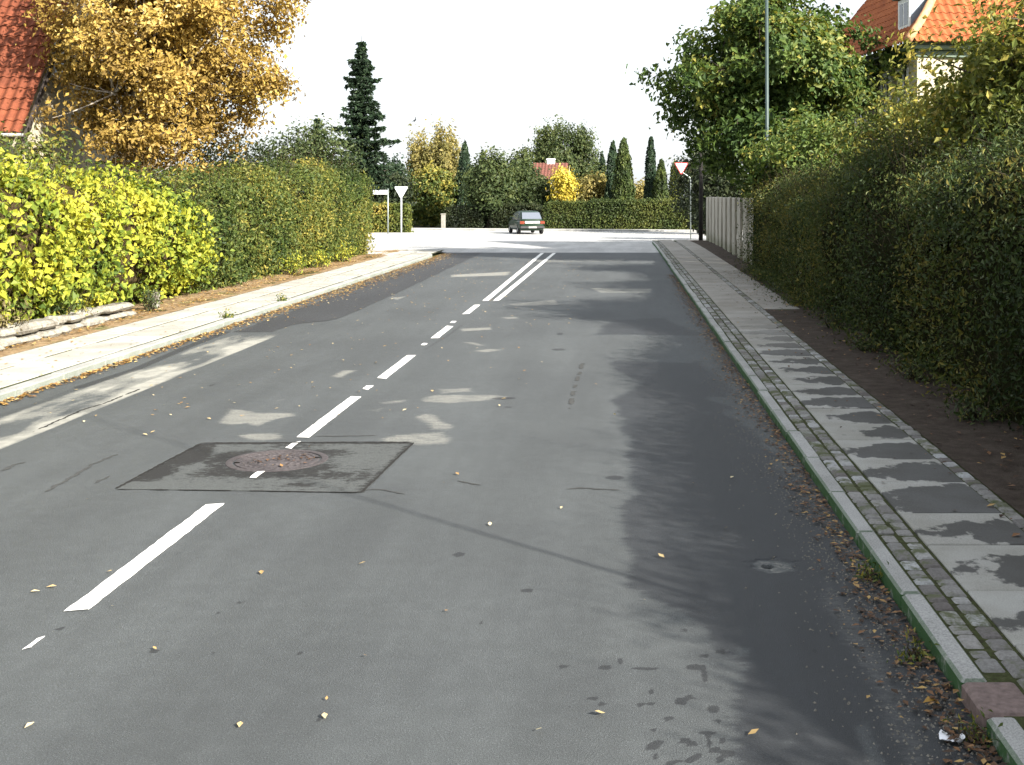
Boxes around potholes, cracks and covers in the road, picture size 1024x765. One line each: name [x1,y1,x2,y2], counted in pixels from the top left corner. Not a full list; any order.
crack [45,454,118,492]
manhole cover [225,449,328,472]
